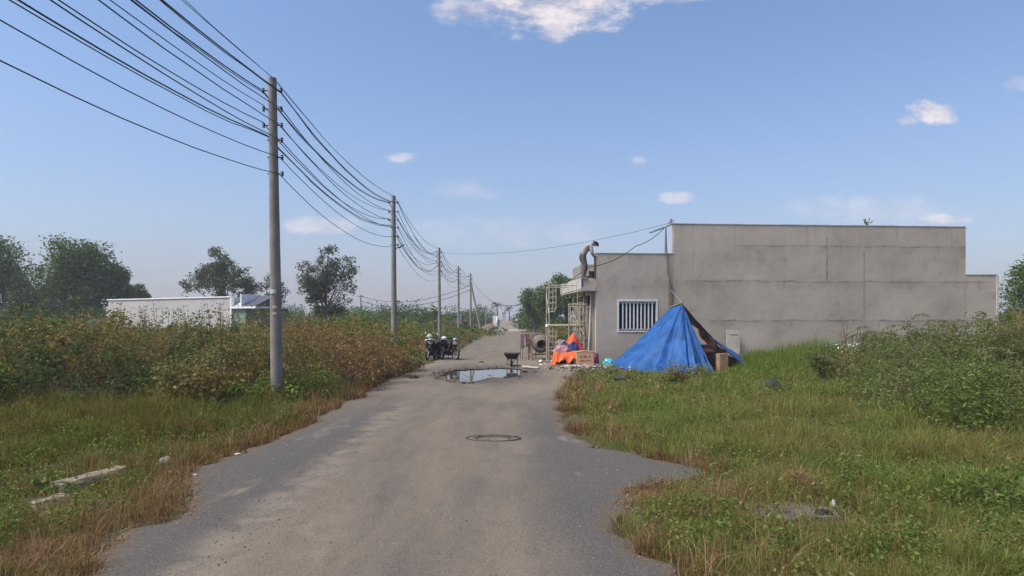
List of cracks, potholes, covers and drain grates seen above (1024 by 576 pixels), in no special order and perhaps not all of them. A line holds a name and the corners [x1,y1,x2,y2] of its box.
pothole [429,367,537,384]
